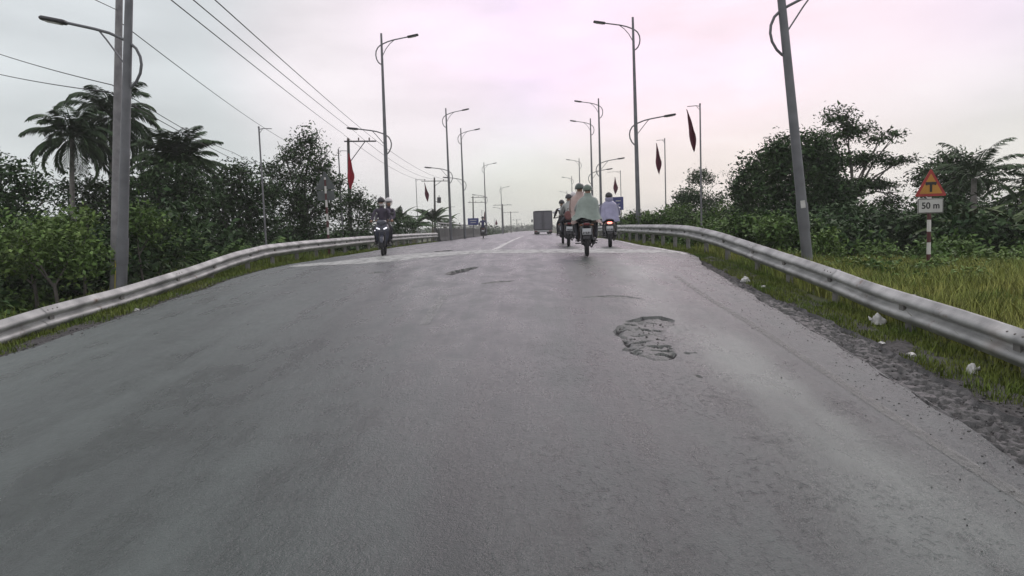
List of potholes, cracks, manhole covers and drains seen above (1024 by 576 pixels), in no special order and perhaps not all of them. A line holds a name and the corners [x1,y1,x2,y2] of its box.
pothole [446,267,479,275]
pothole [613,316,677,361]
